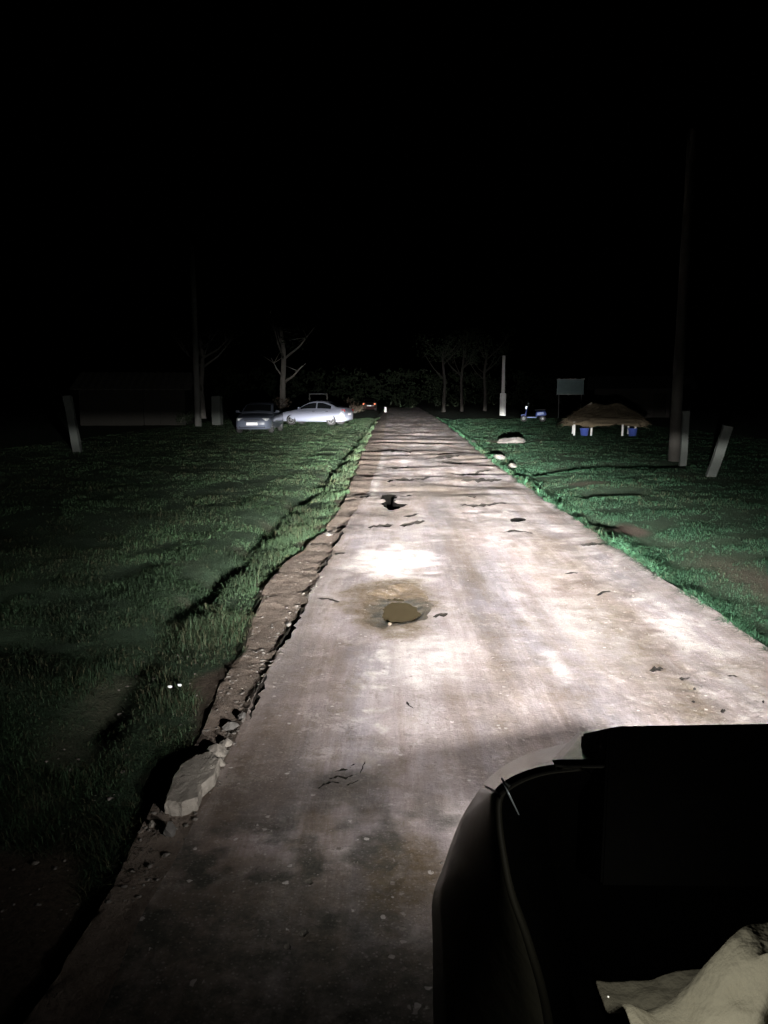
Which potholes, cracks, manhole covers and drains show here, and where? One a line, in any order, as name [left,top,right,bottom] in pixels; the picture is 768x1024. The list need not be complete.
crack [434,454,505,508]
crack [249,598,339,719]
crack [318,762,365,789]
pothole [361,583,434,630]
pothole [380,495,407,510]
